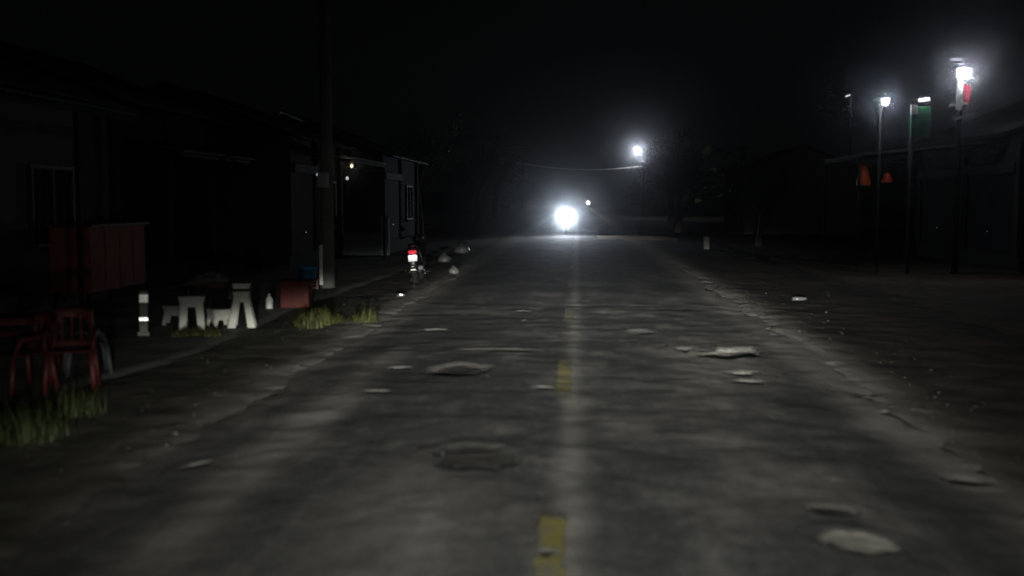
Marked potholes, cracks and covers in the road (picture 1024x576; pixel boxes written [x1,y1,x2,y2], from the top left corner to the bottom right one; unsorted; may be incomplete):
pothole [920,470,1013,491]
pothole [616,328,664,337]
pothole [710,368,778,378]
pothole [349,388,403,396]
pothole [792,522,930,564]
pothole [780,499,884,521]
pothole [686,345,773,361]
pothole [413,360,508,378]
pothole [375,364,424,372]
pothole [415,439,540,475]
